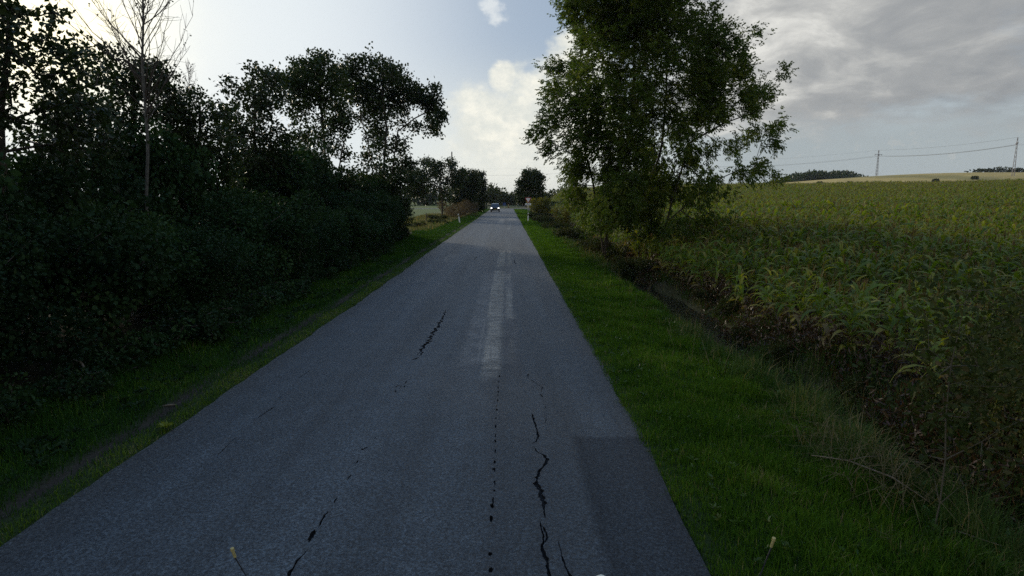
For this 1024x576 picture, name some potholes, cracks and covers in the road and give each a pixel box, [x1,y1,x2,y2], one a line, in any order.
crack [527,374,572,576]
crack [411,310,446,360]
crack [287,435,378,576]
